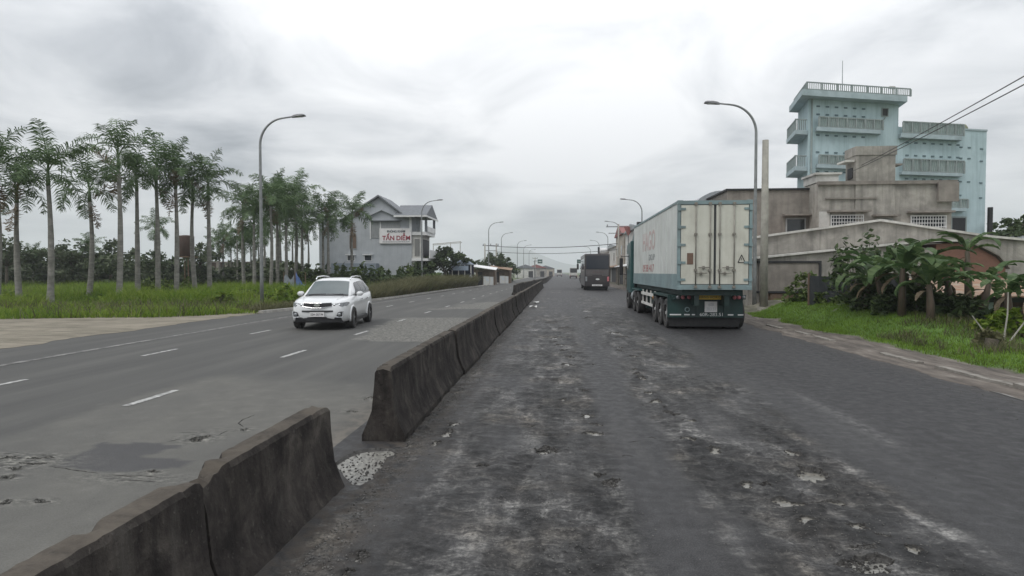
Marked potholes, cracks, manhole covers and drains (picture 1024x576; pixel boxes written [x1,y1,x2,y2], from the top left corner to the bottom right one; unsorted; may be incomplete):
pothole [834,551,895,574]
pothole [793,465,832,483]
pothole [765,495,808,507]
pothole [601,477,620,488]
pothole [904,543,925,554]
pothole [534,445,559,455]
